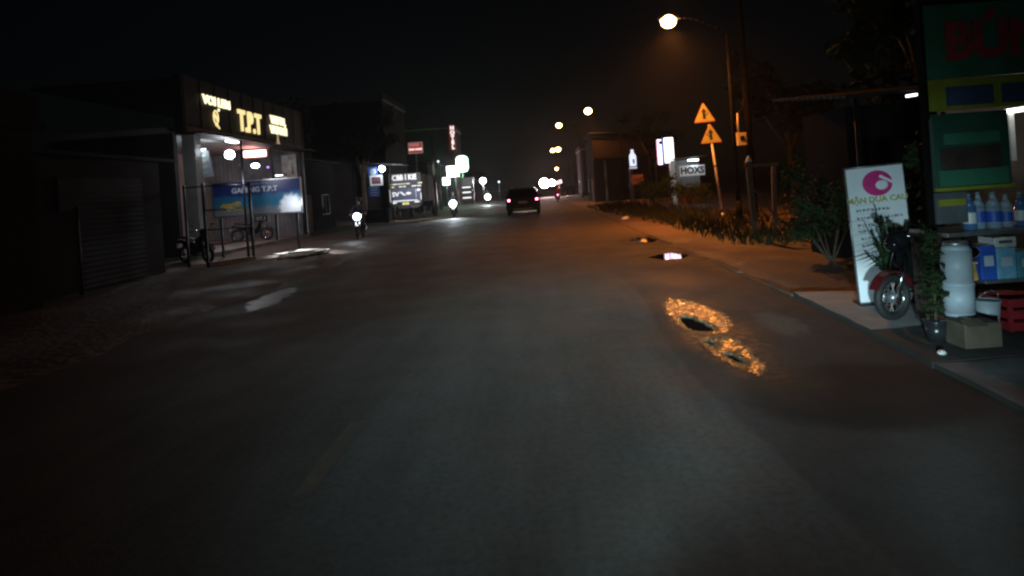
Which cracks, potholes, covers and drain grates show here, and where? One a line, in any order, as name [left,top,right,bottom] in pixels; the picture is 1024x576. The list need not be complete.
pothole [662,298,733,335]
pothole [697,335,768,377]
